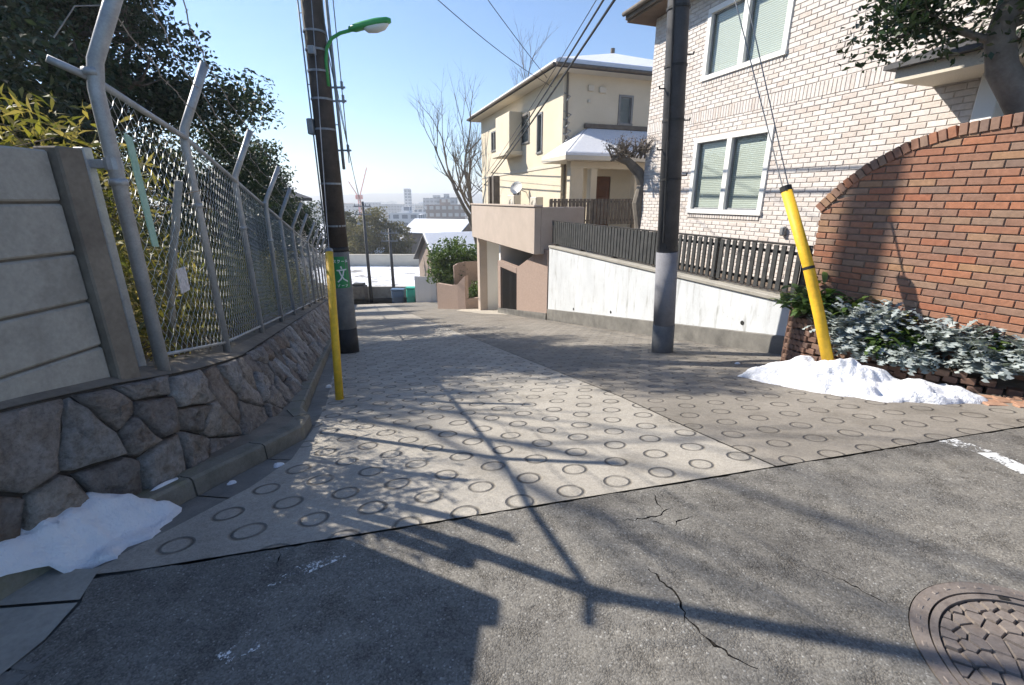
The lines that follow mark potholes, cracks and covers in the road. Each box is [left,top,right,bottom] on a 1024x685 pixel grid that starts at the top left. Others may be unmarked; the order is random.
crack [618,495,693,526]
manhole cover [908,582,1024,685]
crack [816,569,893,608]
crack [648,569,758,669]
